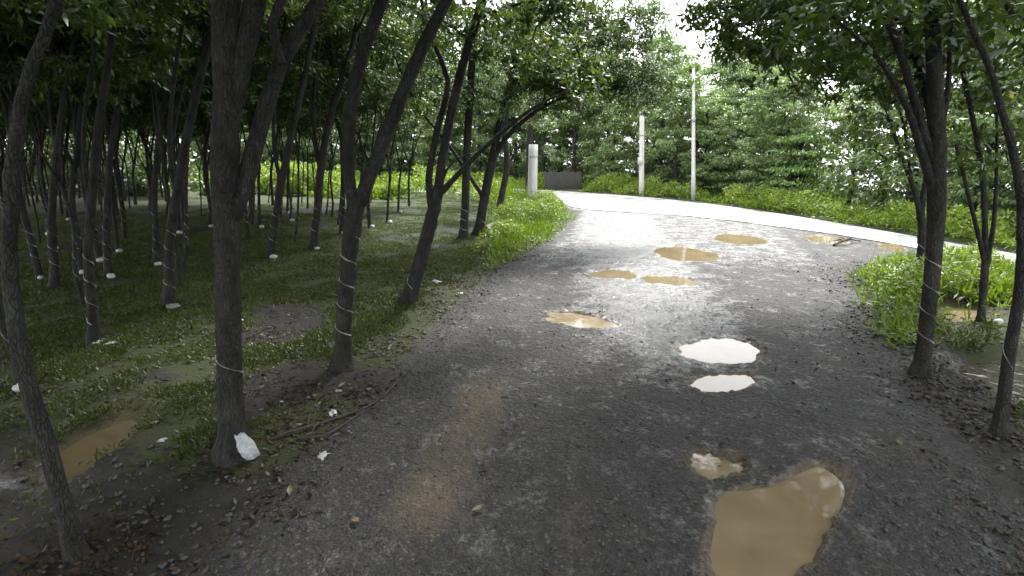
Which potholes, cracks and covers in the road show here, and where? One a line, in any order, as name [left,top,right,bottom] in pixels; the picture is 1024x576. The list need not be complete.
pothole [581,266,643,281]
pothole [684,451,867,576]
pothole [636,273,705,288]
pothole [707,232,776,246]
pothole [539,309,637,331]
pothole [793,234,854,245]
pothole [666,442,777,492]
pothole [664,333,775,368]
pothole [677,369,772,398]
pothole [647,244,727,263]
pothole [870,243,914,253]
